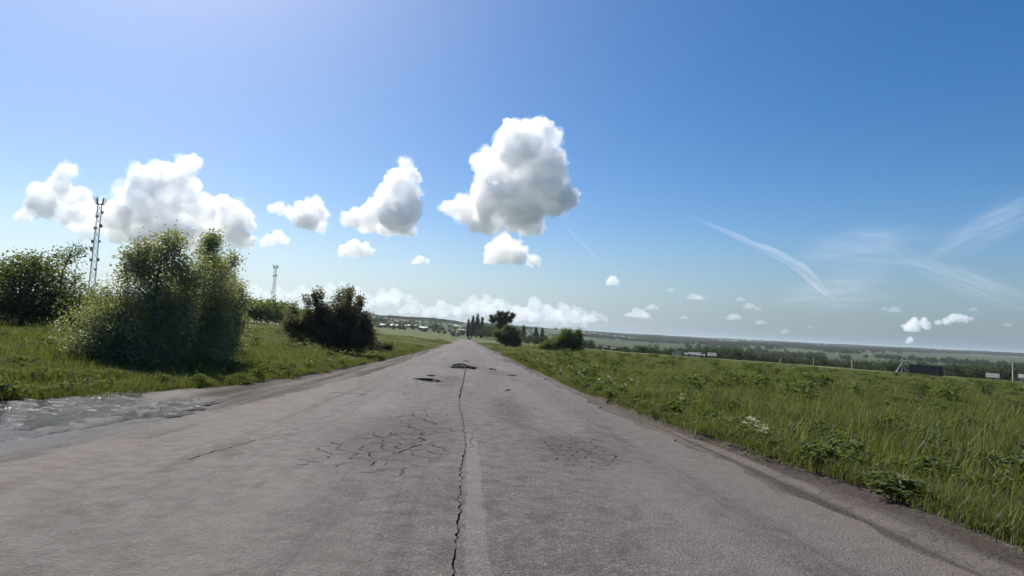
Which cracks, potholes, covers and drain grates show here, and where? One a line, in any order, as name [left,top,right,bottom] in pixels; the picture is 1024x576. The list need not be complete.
crack [434,369,474,576]
crack [542,438,631,470]
crack [298,411,454,475]
